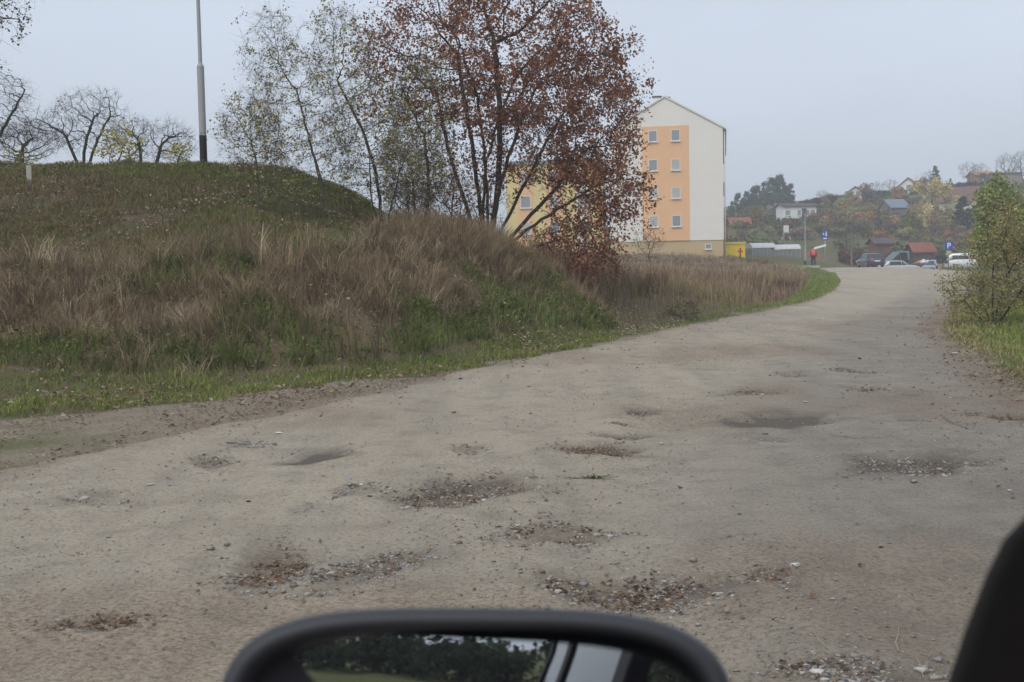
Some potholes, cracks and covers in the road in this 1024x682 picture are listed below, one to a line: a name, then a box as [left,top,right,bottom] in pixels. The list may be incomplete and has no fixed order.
pothole [331,462,638,529]
pothole [435,556,850,628]
pothole [510,438,672,461]
pothole [177,451,245,475]
pothole [317,476,398,501]
pothole [677,408,869,435]
pothole [684,387,818,399]
pothole [197,522,349,617]
pothole [427,511,667,560]
pothole [40,484,156,512]
pothole [250,538,496,606]
pothole [796,445,1024,486]
